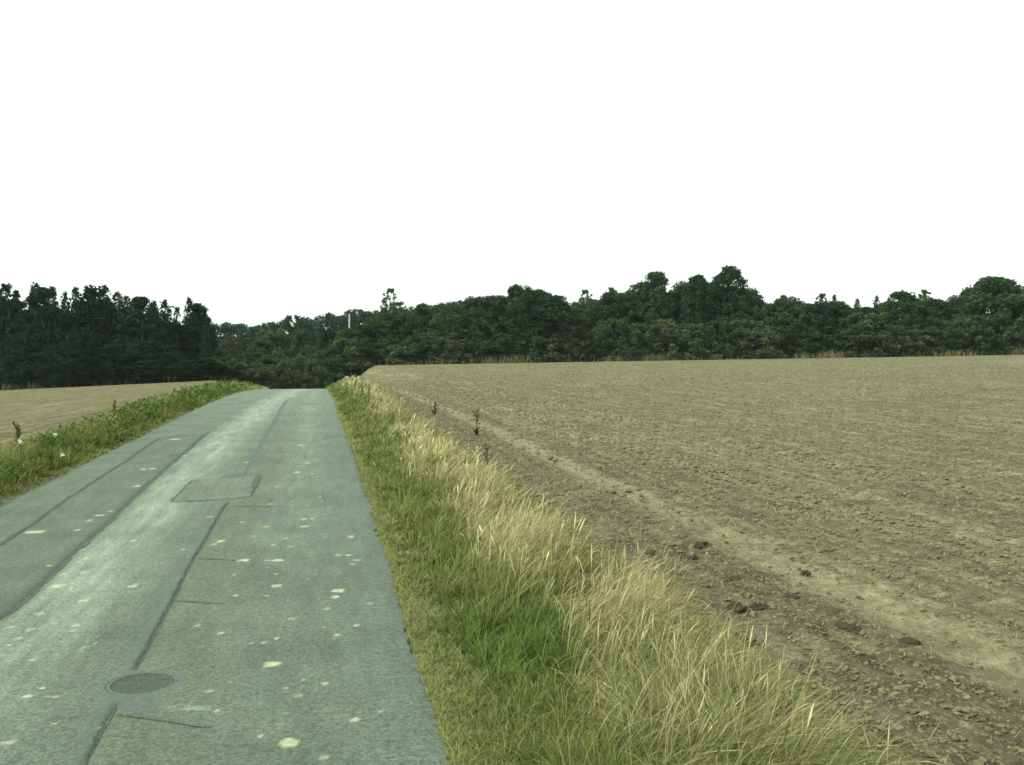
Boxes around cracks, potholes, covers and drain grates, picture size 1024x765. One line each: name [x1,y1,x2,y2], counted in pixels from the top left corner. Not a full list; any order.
manhole cover [106,671,178,695]
